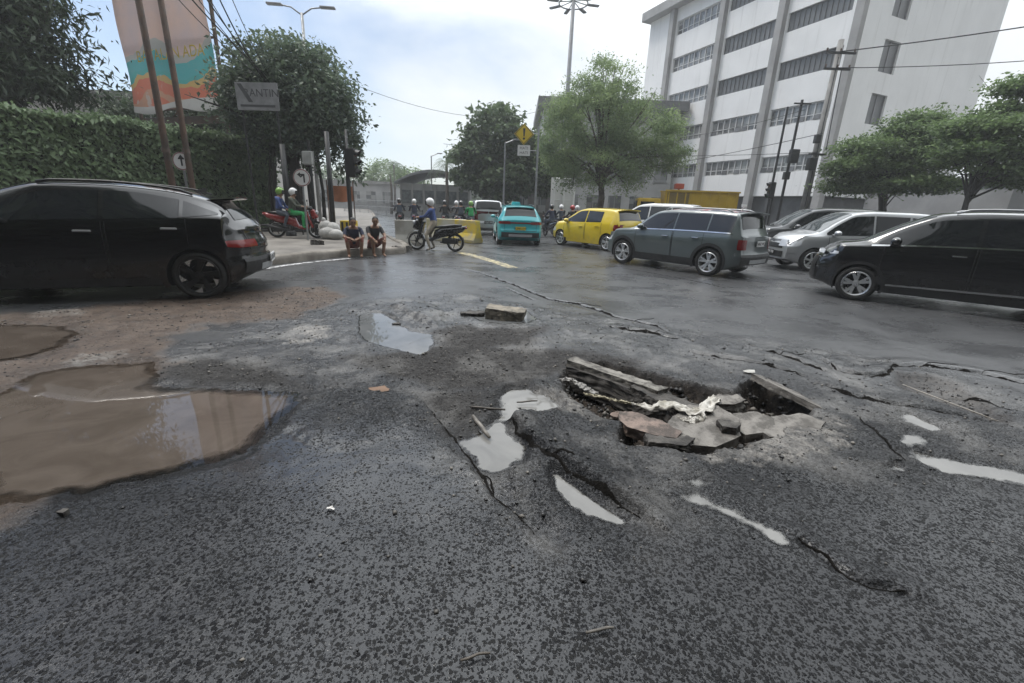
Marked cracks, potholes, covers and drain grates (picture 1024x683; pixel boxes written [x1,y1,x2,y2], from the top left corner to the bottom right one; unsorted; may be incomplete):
crack [767,350,1024,460]
pothole [0,360,308,507]
pothole [548,466,636,527]
pothole [0,323,87,362]
crack [798,537,905,592]
pothole [356,311,437,355]
pothole [559,360,815,455]
pothole [450,385,566,477]
crack [469,270,678,339]
